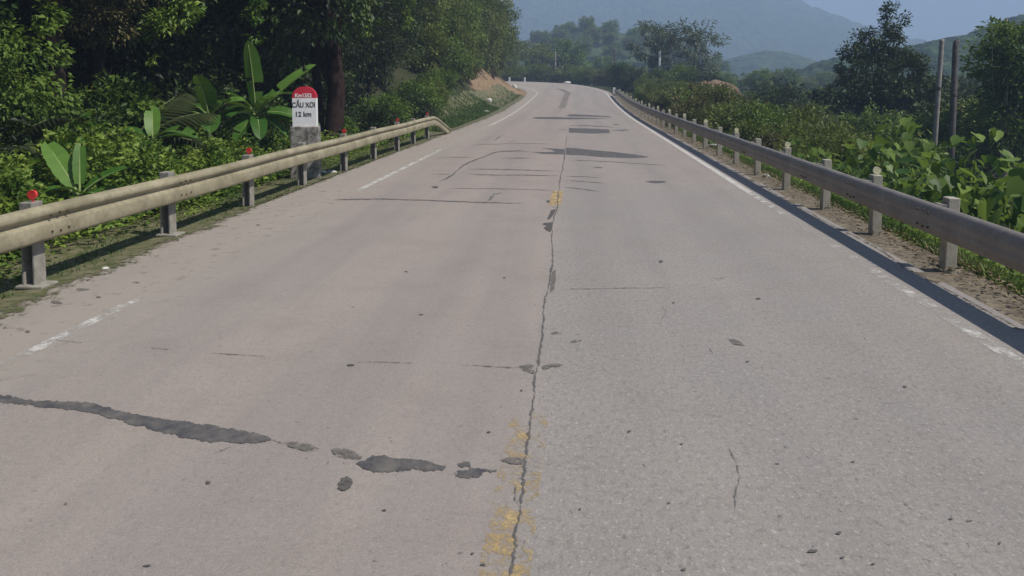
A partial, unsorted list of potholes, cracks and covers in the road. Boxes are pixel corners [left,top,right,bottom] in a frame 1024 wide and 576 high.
crack [509,154,565,575]
